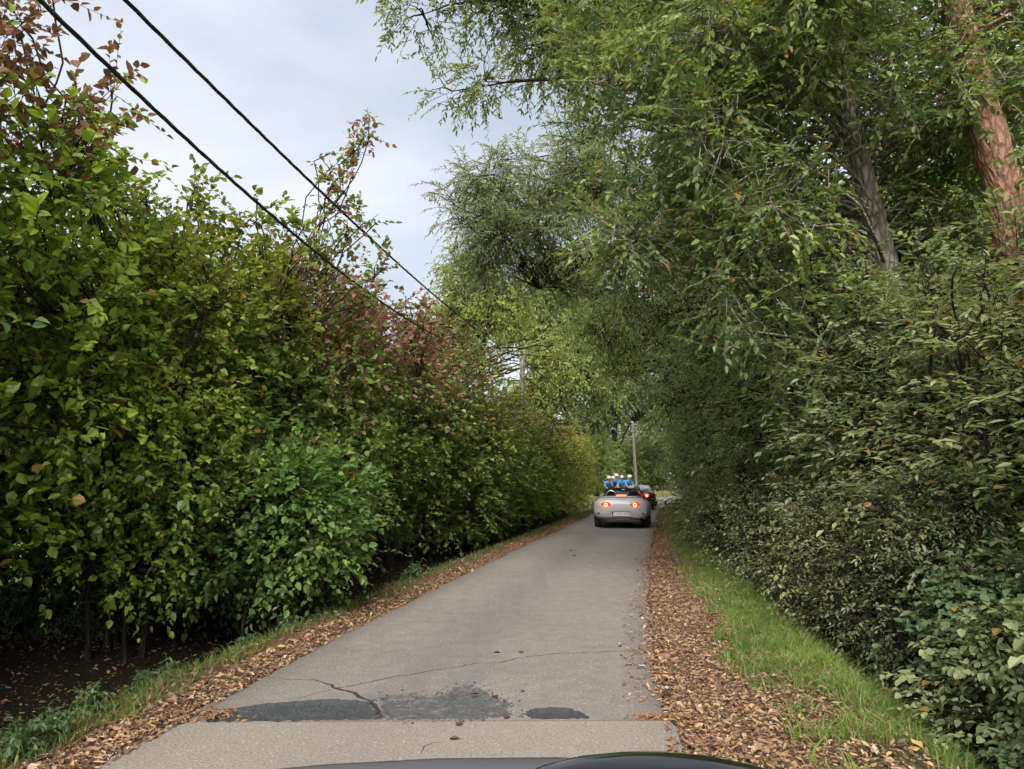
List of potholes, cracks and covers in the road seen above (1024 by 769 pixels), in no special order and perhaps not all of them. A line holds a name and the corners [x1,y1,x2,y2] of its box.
crack [271,649,648,717]
